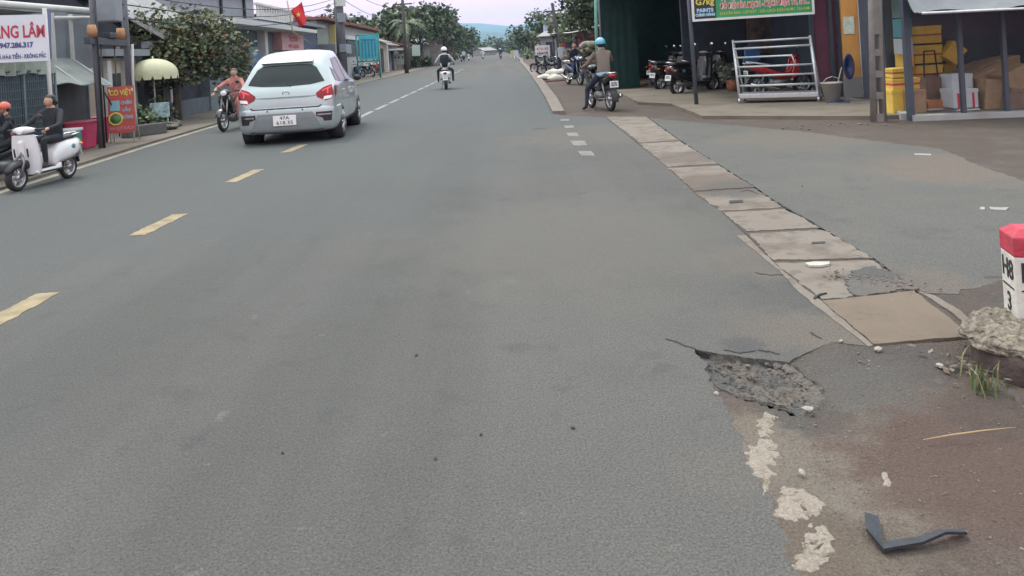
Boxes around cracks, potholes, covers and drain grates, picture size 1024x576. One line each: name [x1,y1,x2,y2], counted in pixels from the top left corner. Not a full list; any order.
crack [665,339,707,357]
pothole [698,353,827,418]
